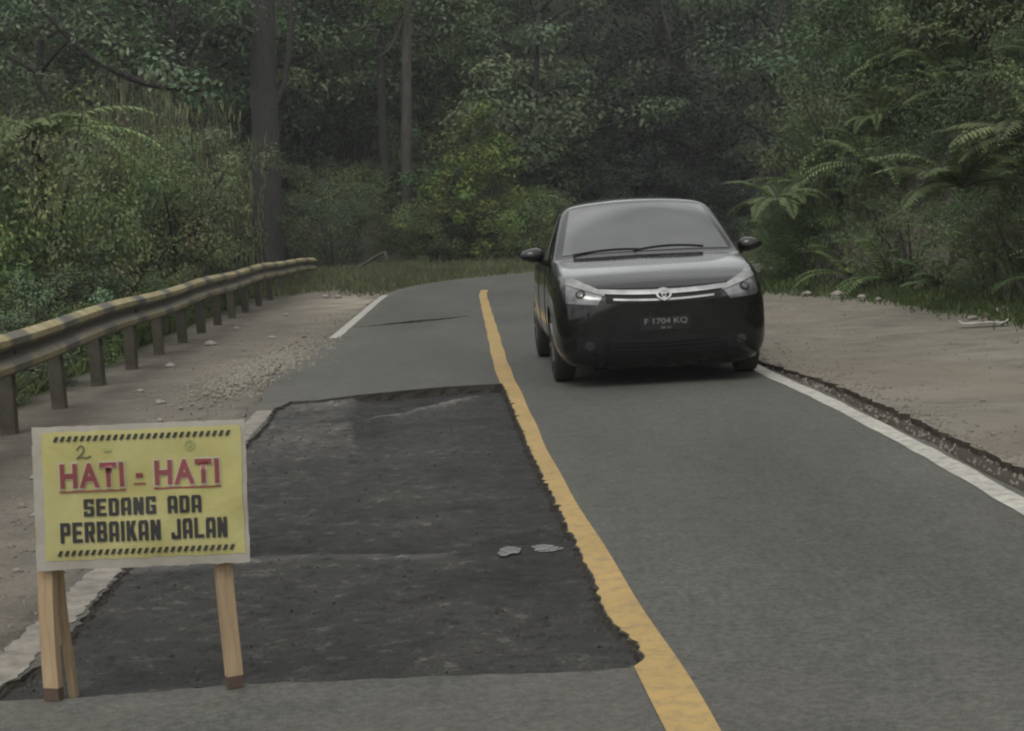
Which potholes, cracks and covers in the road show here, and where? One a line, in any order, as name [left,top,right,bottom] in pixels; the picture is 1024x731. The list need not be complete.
crack [358,316,465,327]
